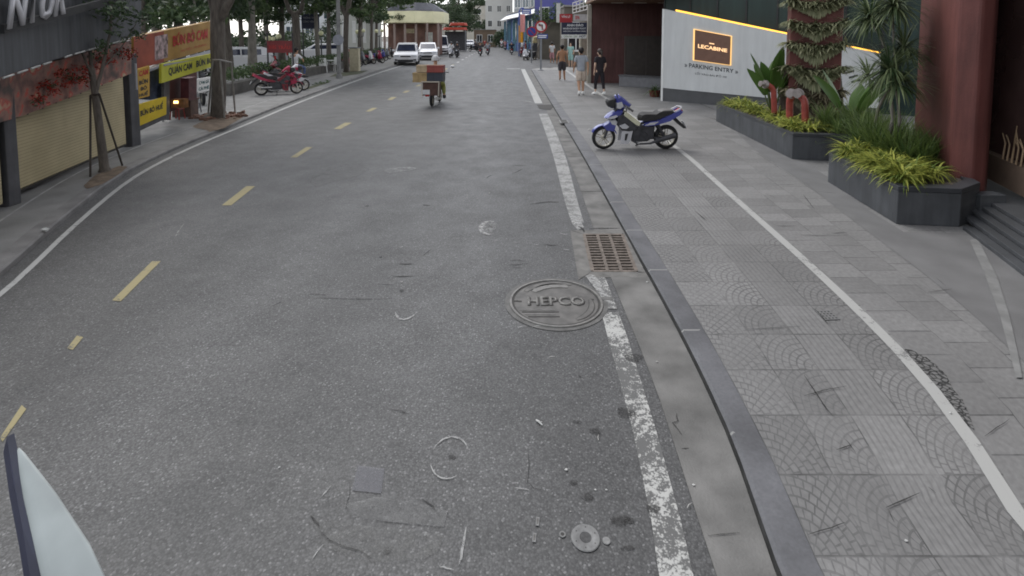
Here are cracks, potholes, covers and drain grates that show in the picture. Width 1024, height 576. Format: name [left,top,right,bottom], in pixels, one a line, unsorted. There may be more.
manhole cover [505,278,613,331]
crack [311,516,372,559]
